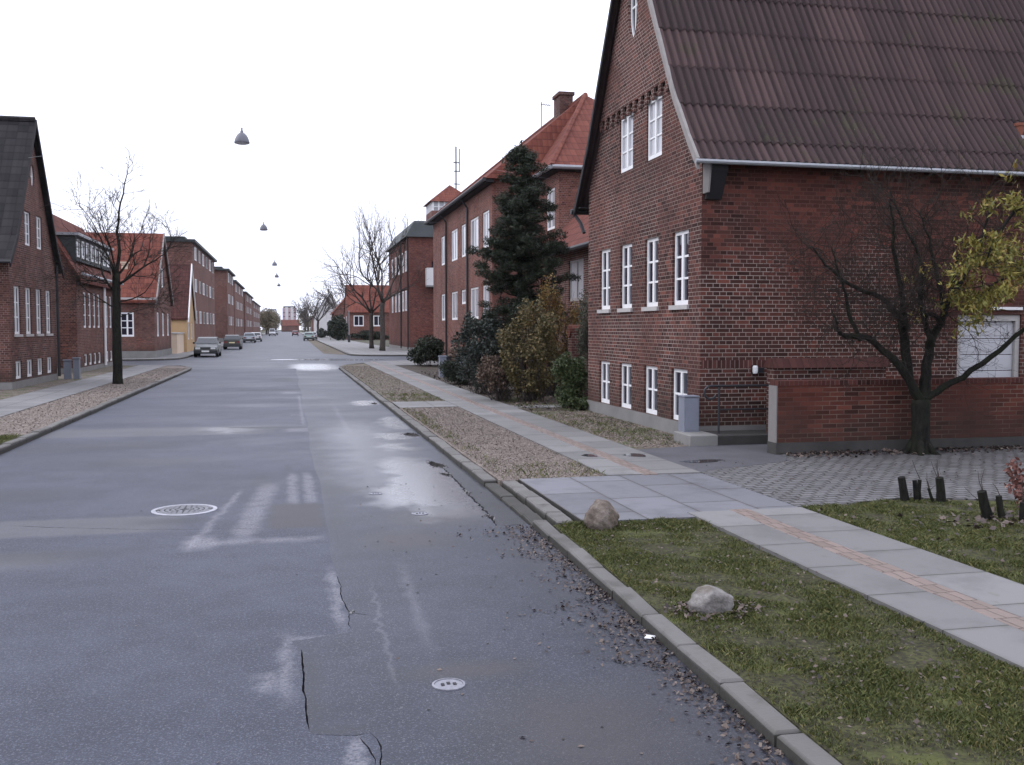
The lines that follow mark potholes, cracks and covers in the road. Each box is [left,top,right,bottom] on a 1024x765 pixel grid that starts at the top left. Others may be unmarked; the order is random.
crack [443,468,522,526]
manhole cover [432,678,465,691]
crack [342,735,382,765]
manhole cover [151,504,217,516]
crack [301,650,309,728]
